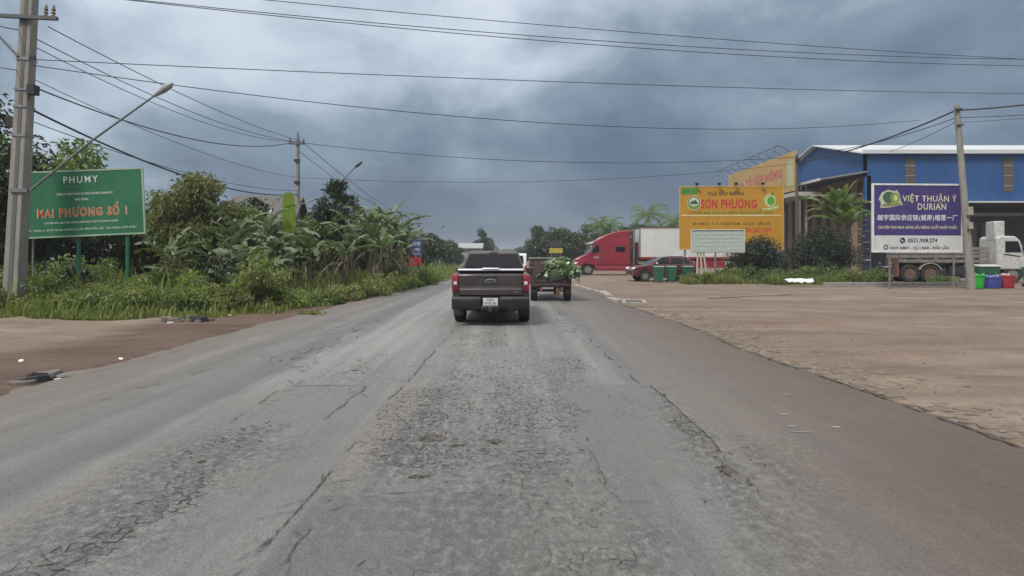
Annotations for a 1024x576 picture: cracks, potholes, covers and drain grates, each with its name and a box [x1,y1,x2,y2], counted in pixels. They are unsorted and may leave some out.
crack [361,331,654,546]
crack [0,437,245,576]
pothole [419,435,449,443]
crack [233,440,364,576]
